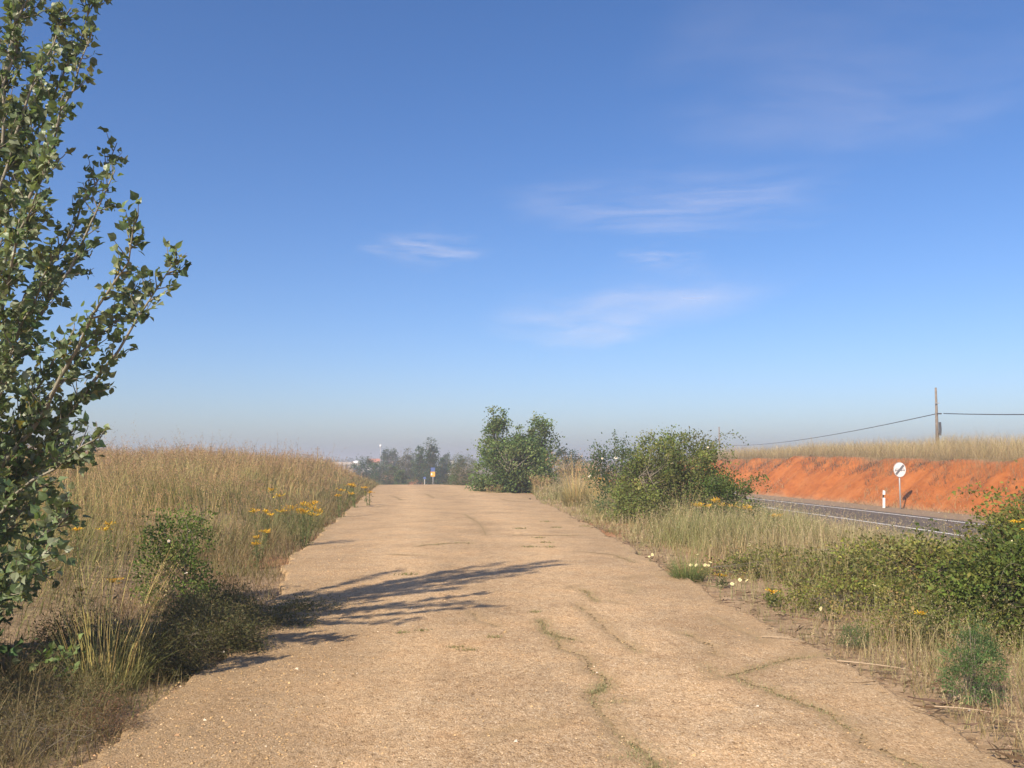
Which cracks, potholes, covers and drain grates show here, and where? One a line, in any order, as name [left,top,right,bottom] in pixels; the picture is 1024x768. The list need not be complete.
crack [692,652,936,768]
crack [534,586,675,768]
